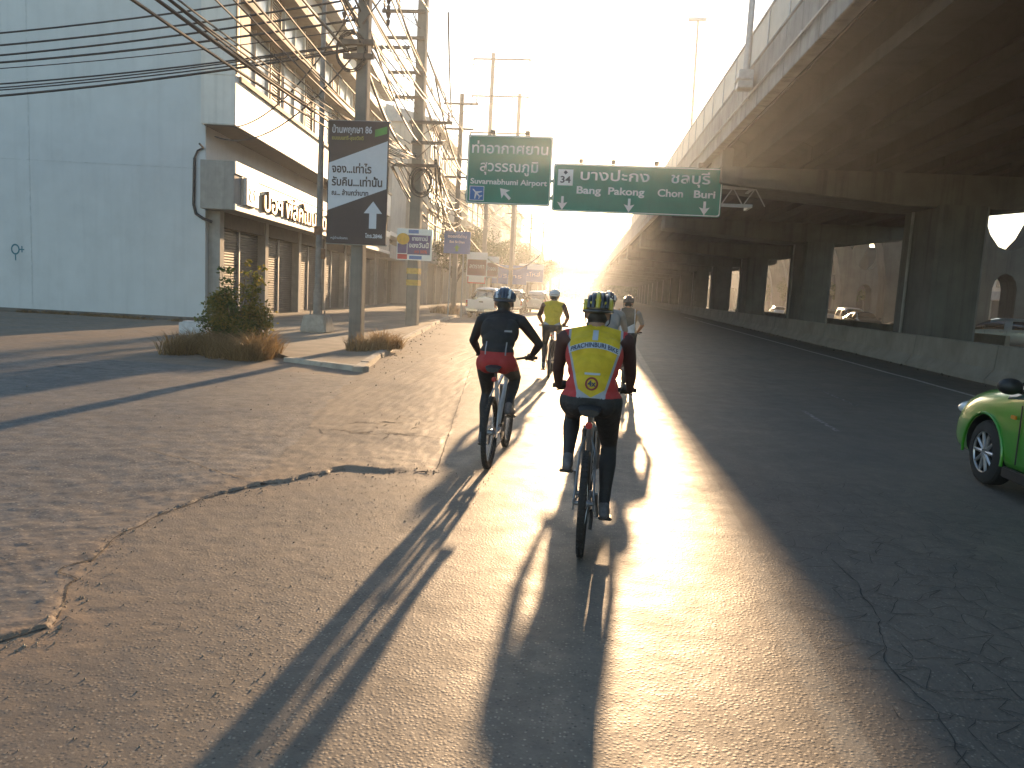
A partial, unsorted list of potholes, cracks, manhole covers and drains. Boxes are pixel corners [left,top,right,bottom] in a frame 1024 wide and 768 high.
crack [319,412,442,439]
crack [0,451,429,642]
crack [727,475,1024,768]
